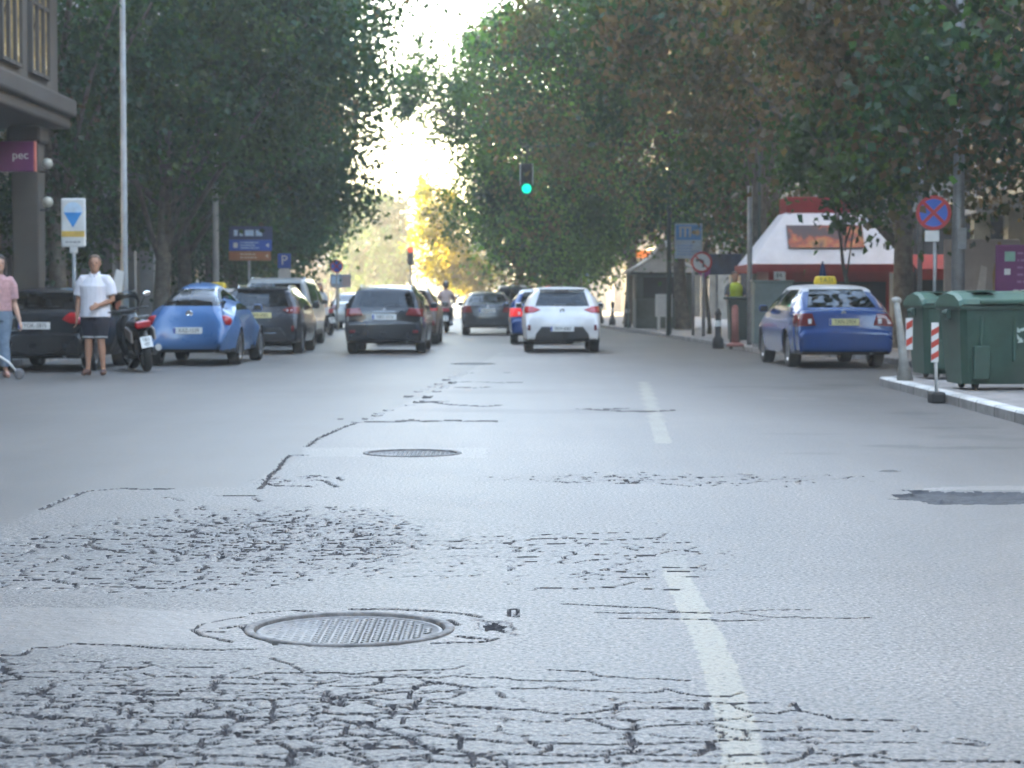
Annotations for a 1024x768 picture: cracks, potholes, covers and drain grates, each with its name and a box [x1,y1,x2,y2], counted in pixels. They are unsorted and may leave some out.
crack [337,381,523,423]
crack [0,475,725,595]
manhole cover [363,449,462,457]
pothole [889,490,1024,505]
crack [0,608,1024,768]
pothole [483,623,507,633]
manhole cover [244,611,455,647]
crack [563,603,870,622]
